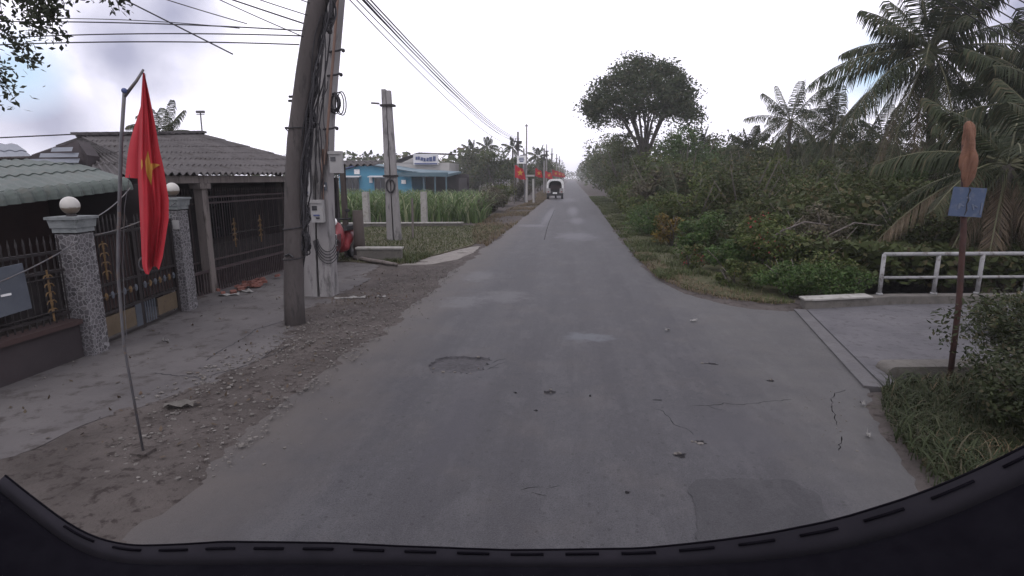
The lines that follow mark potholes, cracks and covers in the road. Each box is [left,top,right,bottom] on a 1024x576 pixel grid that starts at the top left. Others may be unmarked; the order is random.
pothole [429,355,506,374]
